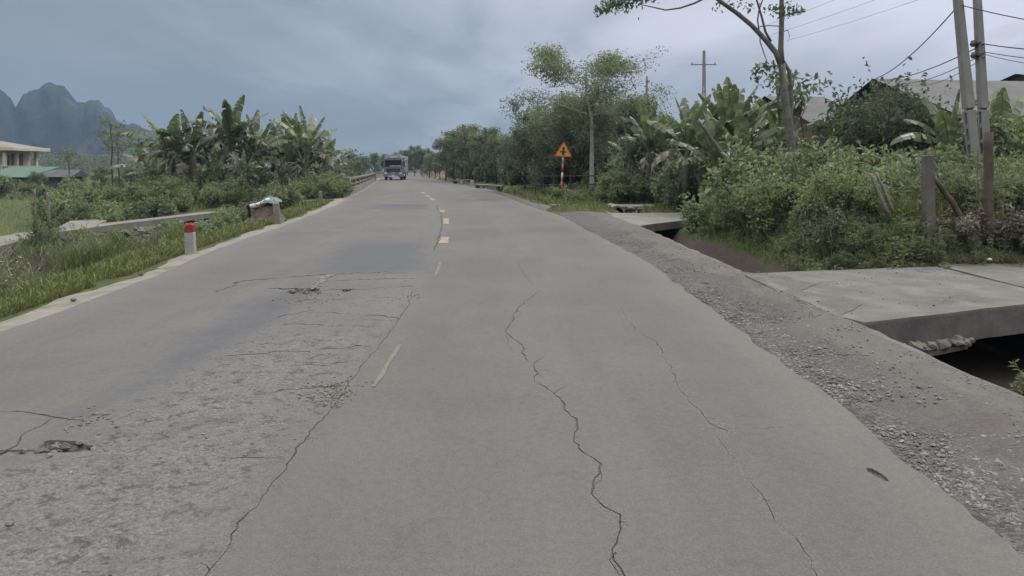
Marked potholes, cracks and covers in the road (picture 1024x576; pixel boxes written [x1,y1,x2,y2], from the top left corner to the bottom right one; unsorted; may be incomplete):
crack [0,411,74,454]
crack [215,272,413,325]
crack [505,290,625,576]
pothole [285,285,321,295]
pothole [866,468,889,481]
pothole [19,440,96,462]
